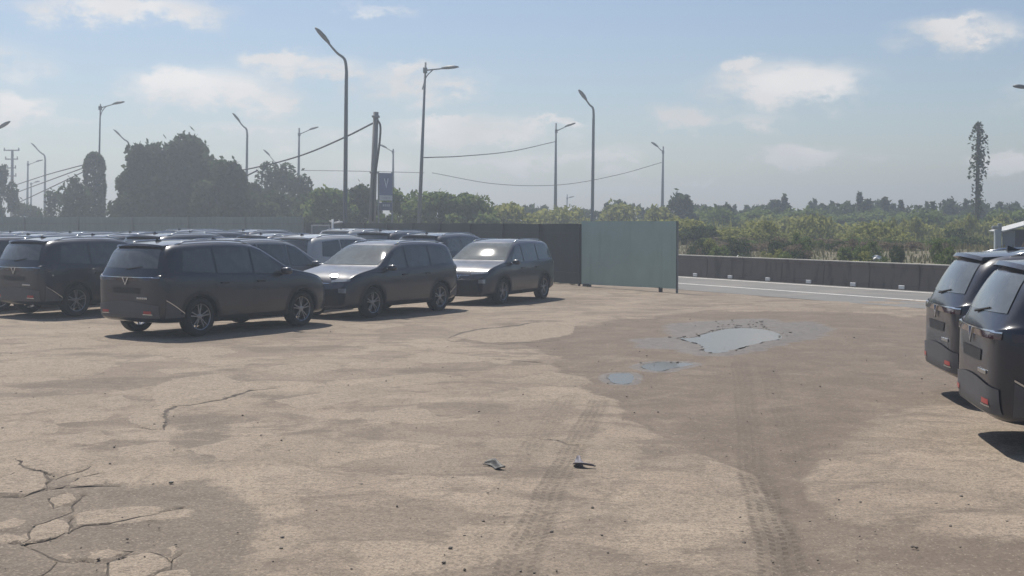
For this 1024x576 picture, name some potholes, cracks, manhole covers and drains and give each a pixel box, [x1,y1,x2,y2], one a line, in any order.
crack [449,323,560,364]
pothole [606,371,636,384]
crack [8,459,183,576]
crack [141,388,275,430]
pothole [668,319,792,353]
pothole [639,360,693,371]
